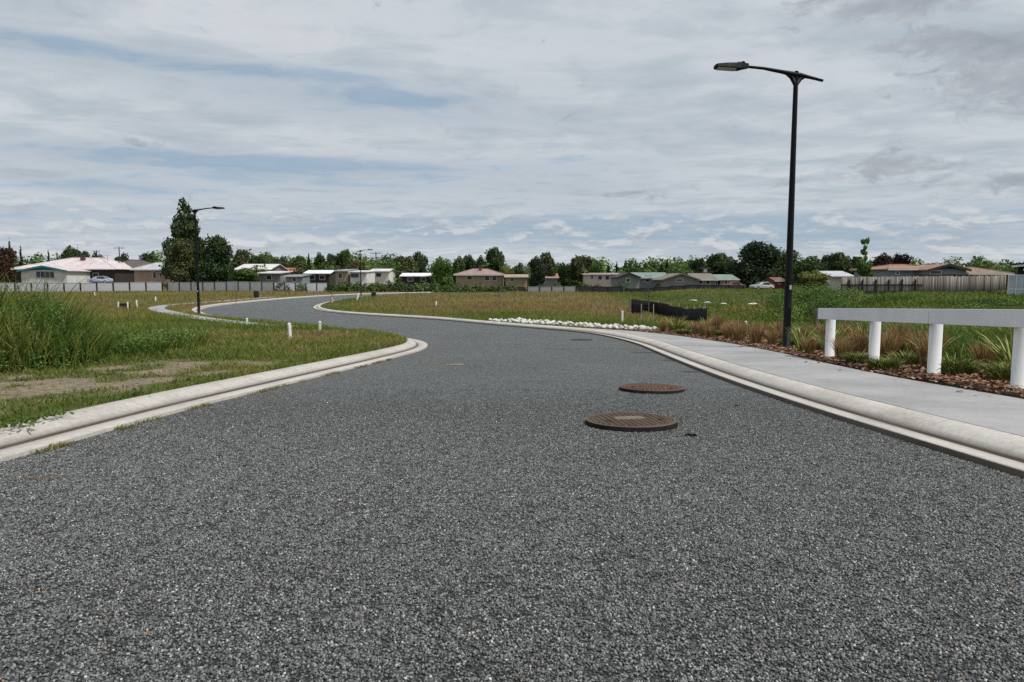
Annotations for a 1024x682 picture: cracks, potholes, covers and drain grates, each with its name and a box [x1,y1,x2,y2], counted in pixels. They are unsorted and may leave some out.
manhole cover [585,412,678,432]
manhole cover [619,383,685,394]
